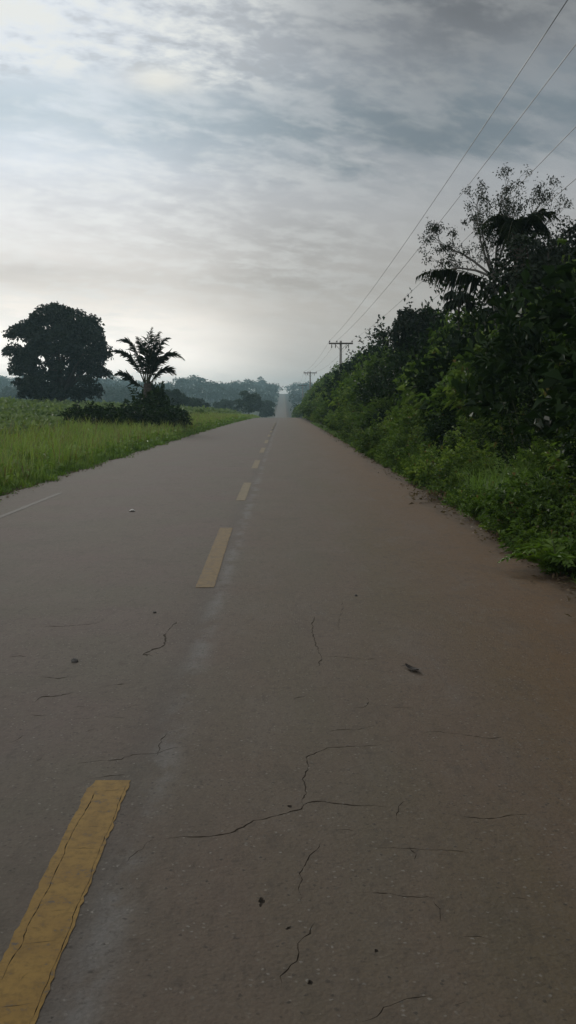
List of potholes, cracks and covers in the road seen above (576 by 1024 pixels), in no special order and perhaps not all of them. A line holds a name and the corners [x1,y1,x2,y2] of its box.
crack [128,726,409,860]
crack [311,617,377,668]
crack [143,622,177,656]
crack [362,995,478,1022]
crack [298,844,320,903]
crack [273,922,315,985]
